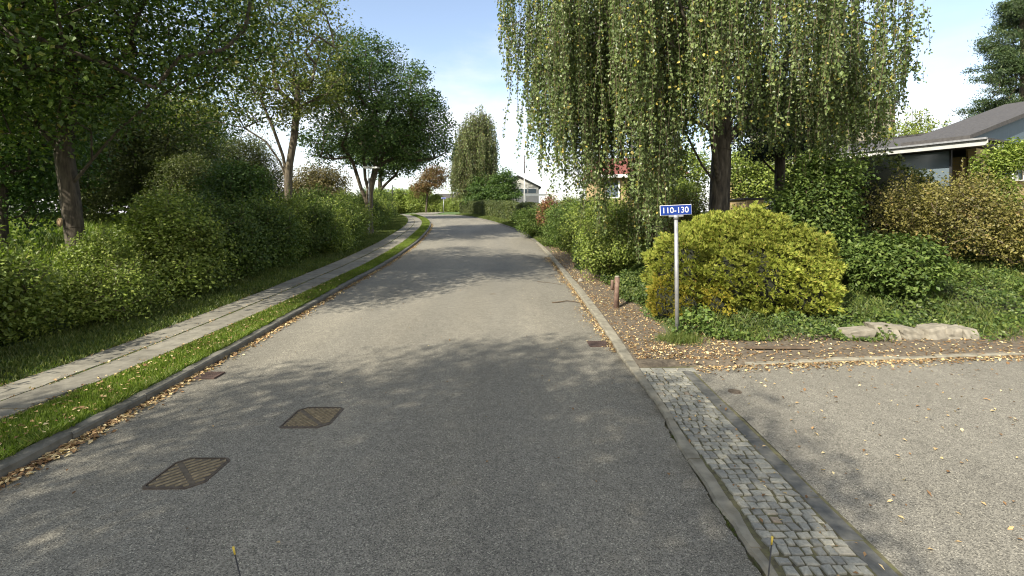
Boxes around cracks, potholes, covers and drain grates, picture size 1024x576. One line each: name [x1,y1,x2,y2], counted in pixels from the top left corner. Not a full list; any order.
drain grate [193,372,225,380]
